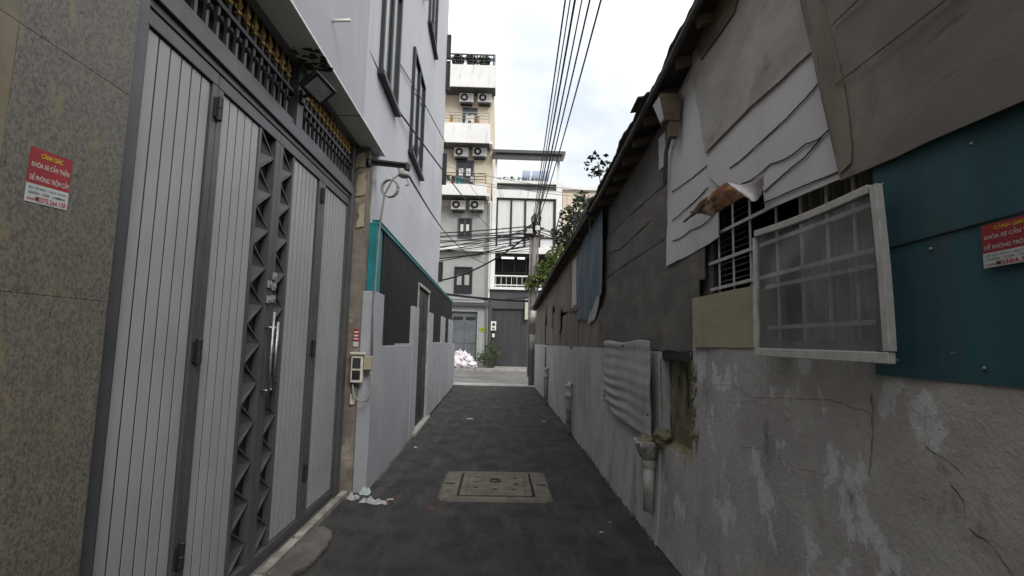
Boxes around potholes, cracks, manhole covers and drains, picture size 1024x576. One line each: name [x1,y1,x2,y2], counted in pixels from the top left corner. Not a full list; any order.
manhole cover [437,471,553,503]
